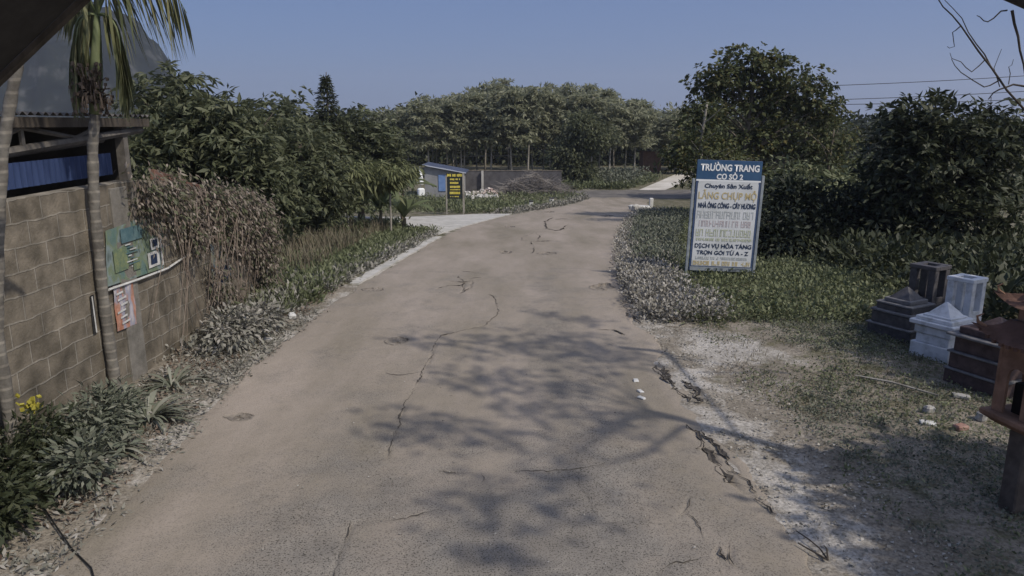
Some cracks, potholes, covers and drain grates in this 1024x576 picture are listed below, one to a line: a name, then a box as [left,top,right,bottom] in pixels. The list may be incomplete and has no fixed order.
crack [333,508,441,576]
pothole [222,412,255,421]
pothole [384,336,410,345]
crack [512,461,611,523]
crack [387,296,499,451]
crack [658,424,782,573]
